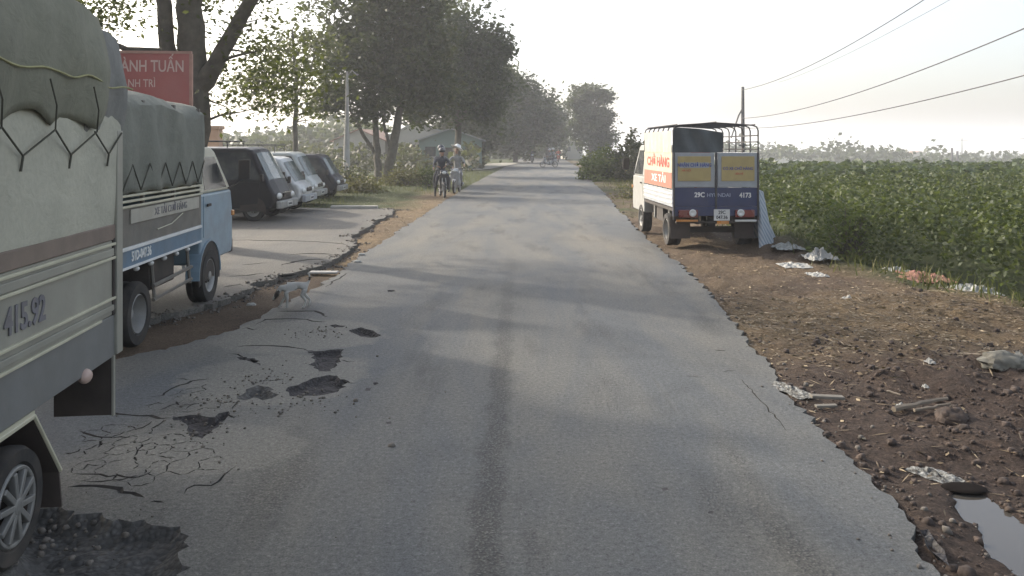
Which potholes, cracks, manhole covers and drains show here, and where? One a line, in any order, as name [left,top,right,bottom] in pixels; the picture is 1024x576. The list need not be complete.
crack [741,379,788,432]
pothole [349,327,381,338]
crack [237,311,327,362]
pothole [172,411,230,439]
crack [66,378,238,503]
pothole [13,507,191,576]
pothole [286,375,349,396]
pothole [304,349,344,371]
pothole [237,385,279,400]
